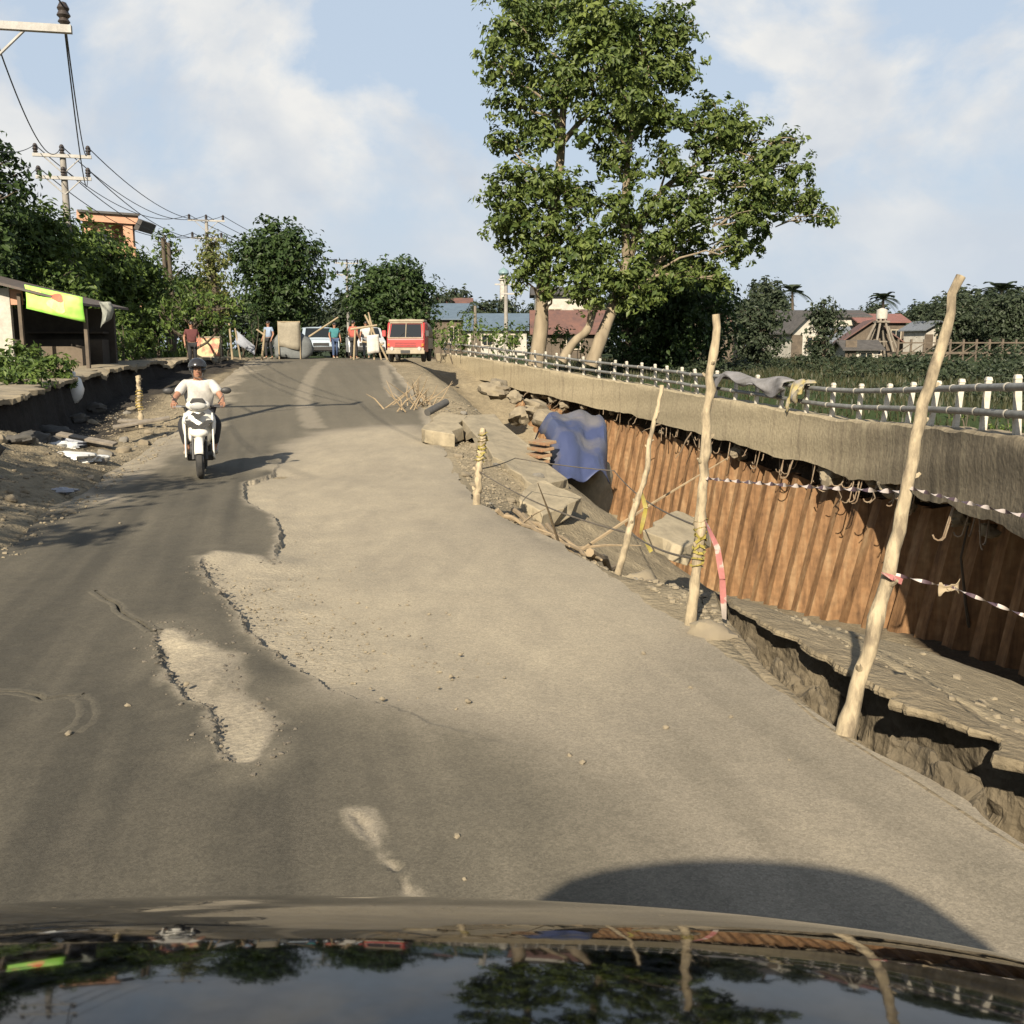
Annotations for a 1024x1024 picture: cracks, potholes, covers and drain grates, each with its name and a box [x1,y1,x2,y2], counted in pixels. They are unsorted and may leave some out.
crack [88,590,162,632]
crack [0,688,101,733]
